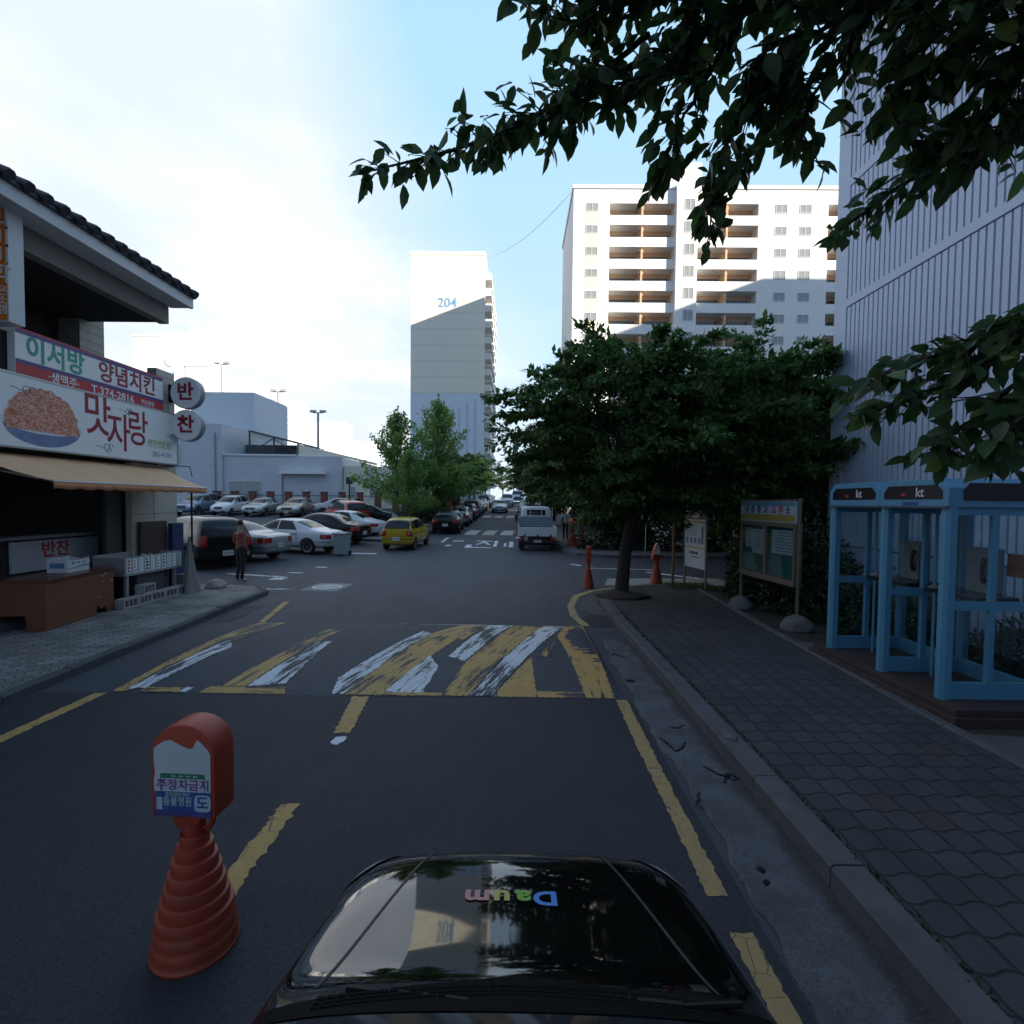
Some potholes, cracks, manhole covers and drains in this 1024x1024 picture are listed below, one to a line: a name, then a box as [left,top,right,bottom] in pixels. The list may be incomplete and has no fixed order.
crack [695,765,730,807]
manhole cover [301,583,353,591]
crack [659,725,686,752]
